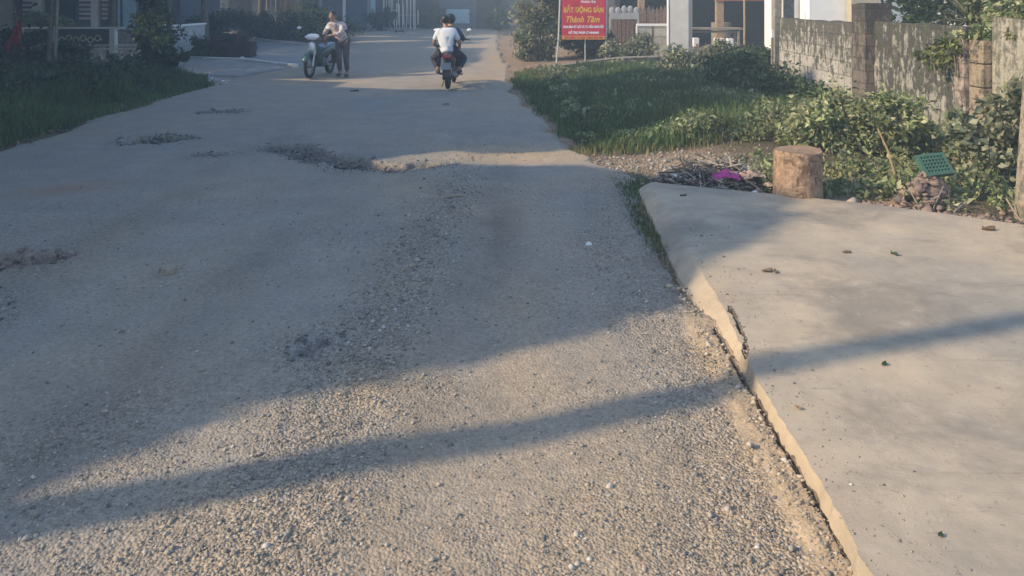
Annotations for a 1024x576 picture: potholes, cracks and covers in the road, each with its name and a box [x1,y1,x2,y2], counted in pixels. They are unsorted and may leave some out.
pothole [253,143,460,174]
pothole [110,132,201,146]
pothole [0,245,77,274]
pothole [283,330,347,363]
pothole [184,150,233,158]
